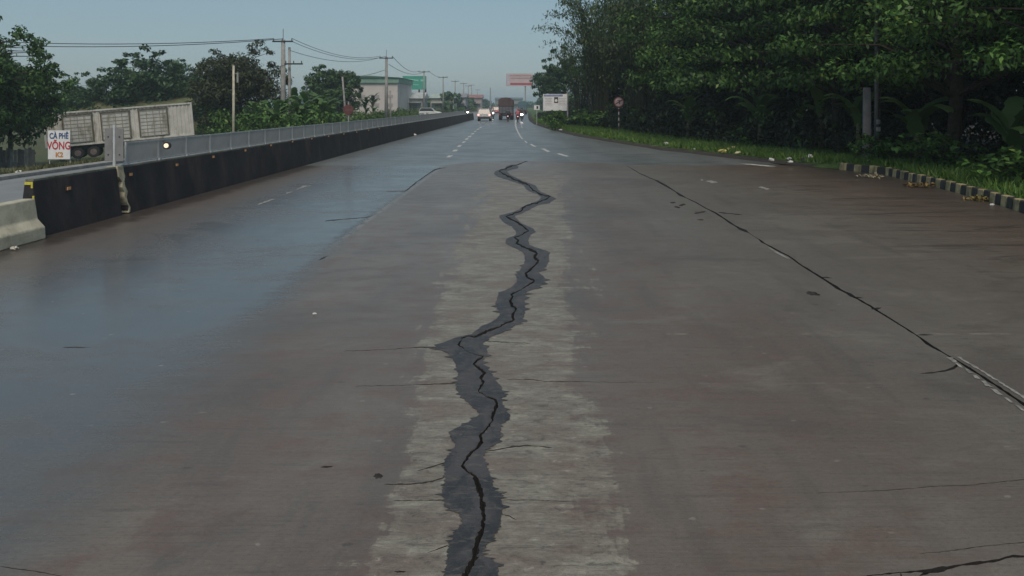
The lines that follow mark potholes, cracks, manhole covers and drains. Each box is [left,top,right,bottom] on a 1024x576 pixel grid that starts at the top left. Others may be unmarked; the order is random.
crack [867,542,1024,576]
crack [822,479,1024,493]
